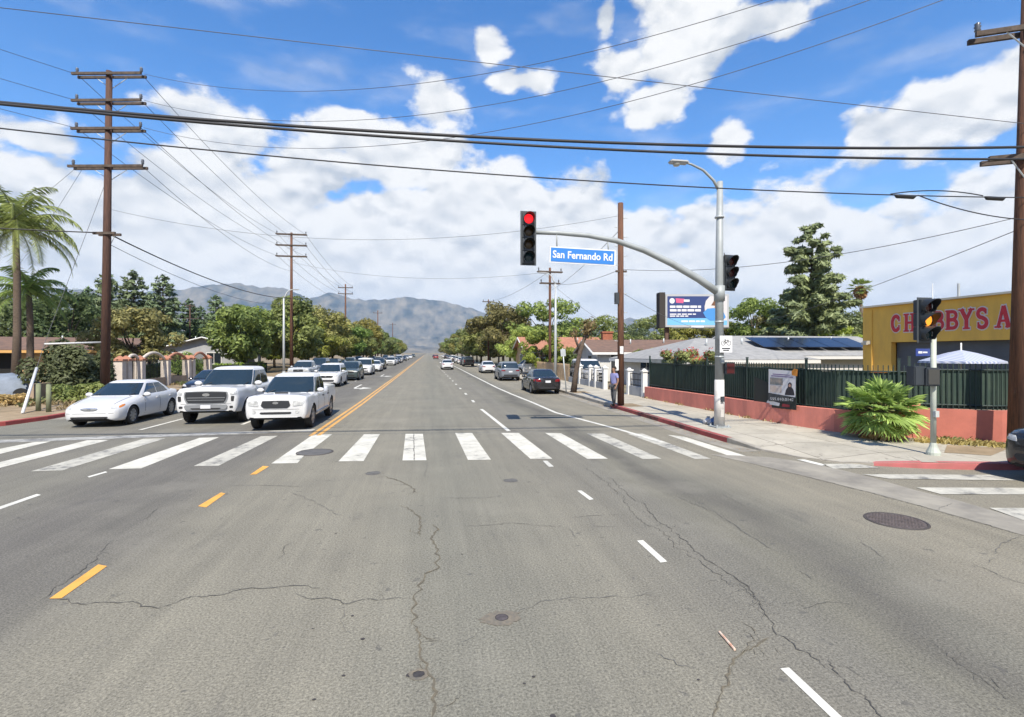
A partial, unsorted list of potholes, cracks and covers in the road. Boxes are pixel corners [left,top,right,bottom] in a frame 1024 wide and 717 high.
manhole cover [478,610,521,626]
crack [613,479,882,717]
crack [7,476,498,716]
manhole cover [863,512,931,530]
